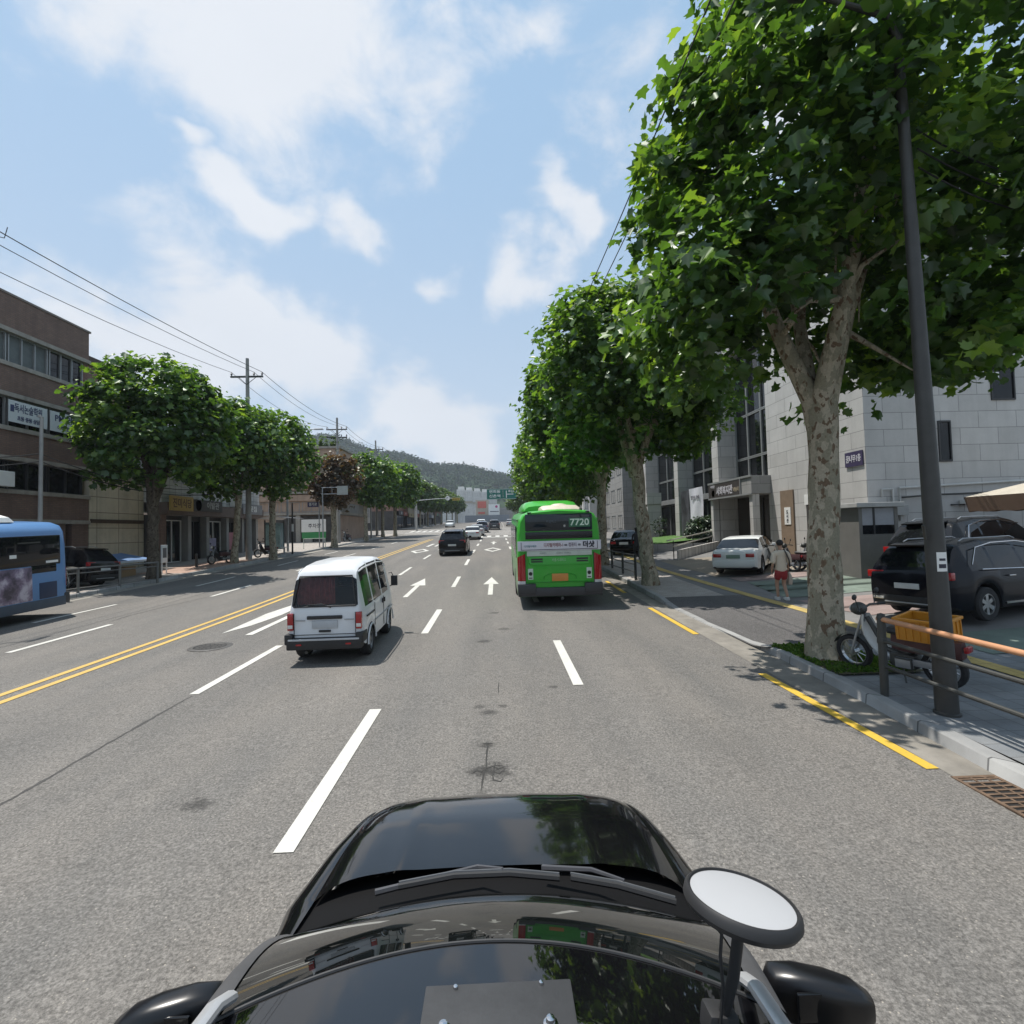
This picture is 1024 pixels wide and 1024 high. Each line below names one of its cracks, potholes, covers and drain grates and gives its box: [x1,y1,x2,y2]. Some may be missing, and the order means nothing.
drain grate [950,774,1024,818]
crack [473,742,505,789]
manhole cover [187,642,233,651]
